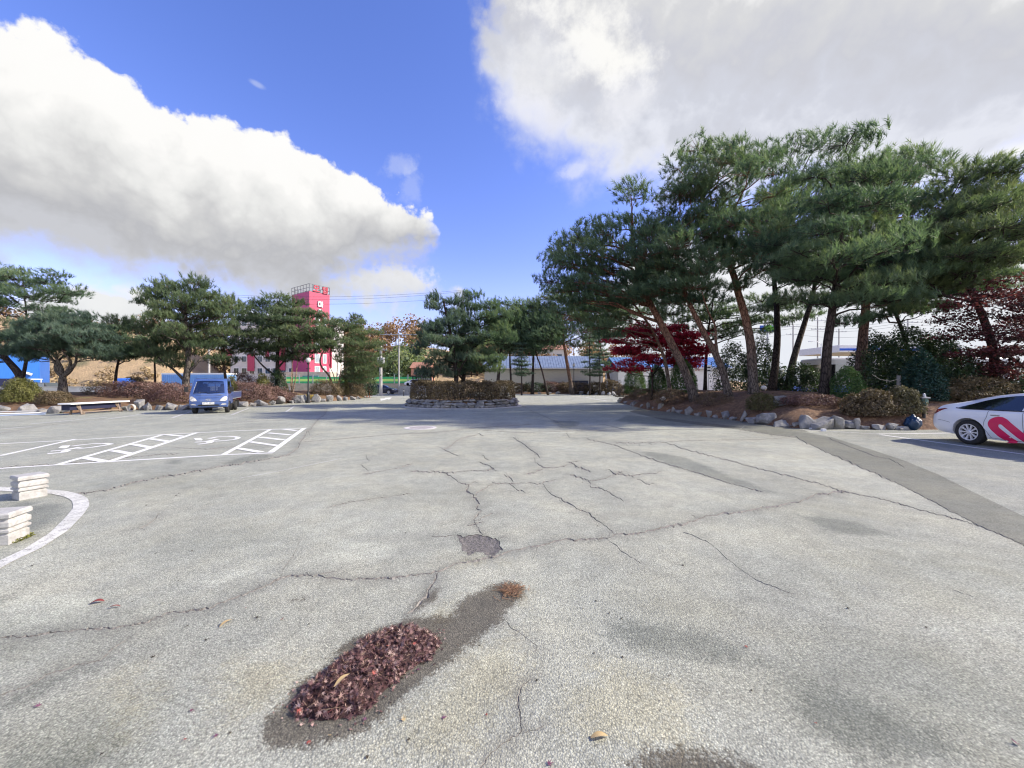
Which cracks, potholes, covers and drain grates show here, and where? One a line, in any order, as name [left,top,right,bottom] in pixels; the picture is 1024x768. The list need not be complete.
pothole [457,534,503,558]
crack [1,412,847,695]
crack [480,682,543,768]
